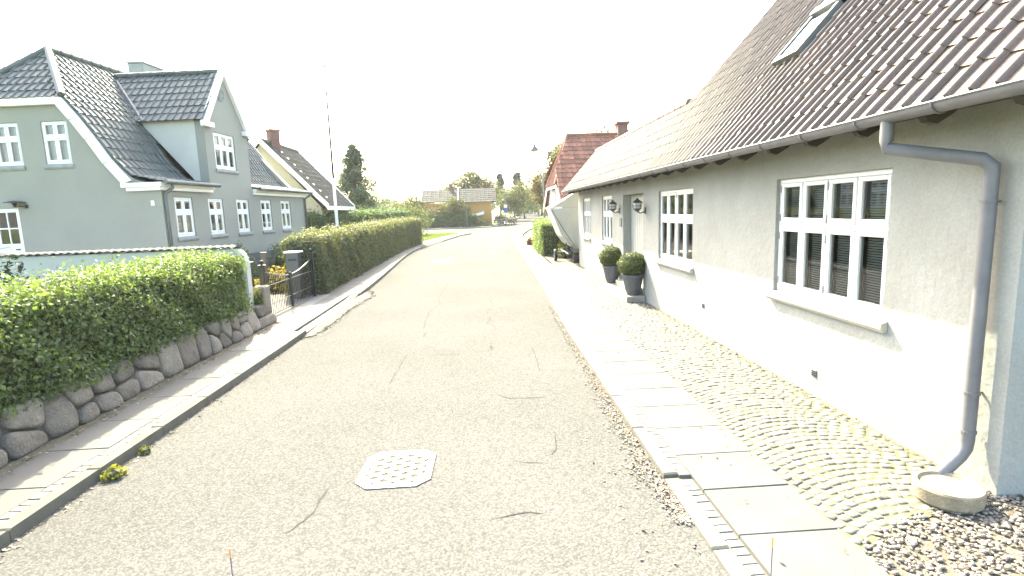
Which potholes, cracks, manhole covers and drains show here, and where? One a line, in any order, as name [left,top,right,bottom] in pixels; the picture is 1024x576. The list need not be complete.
crack [416,251,468,337]
manhole cover [356,449,437,490]
crack [515,427,557,463]
crack [283,489,328,535]
